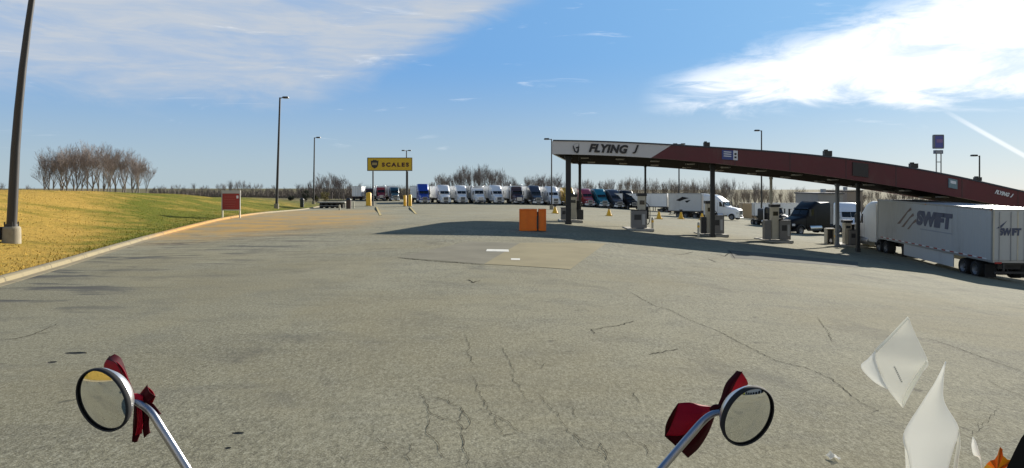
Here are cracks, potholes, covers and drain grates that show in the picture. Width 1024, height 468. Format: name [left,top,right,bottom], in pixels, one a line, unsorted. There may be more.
crack [630,292,878,411]
crack [406,334,527,465]
crack [505,353,611,467]
